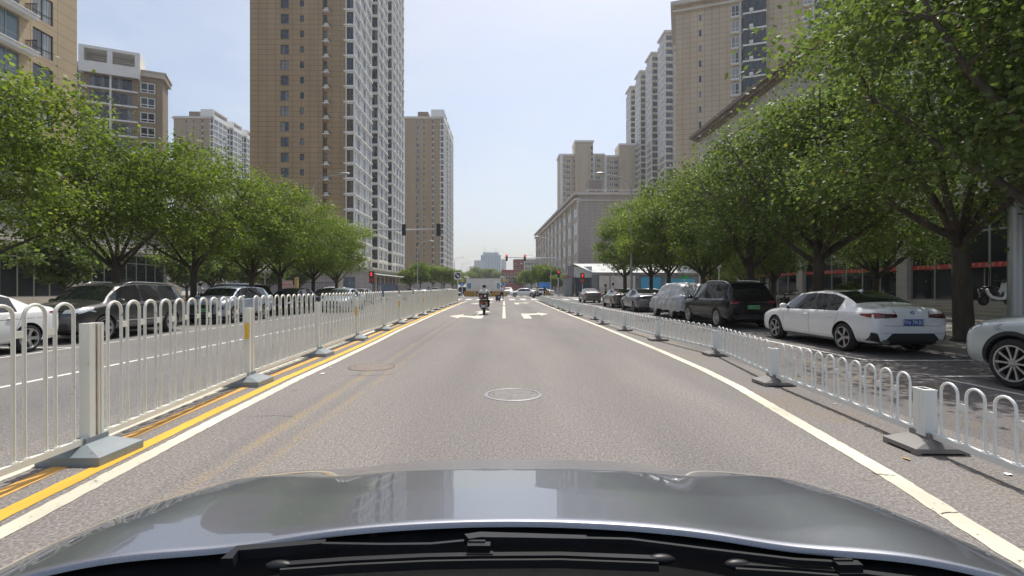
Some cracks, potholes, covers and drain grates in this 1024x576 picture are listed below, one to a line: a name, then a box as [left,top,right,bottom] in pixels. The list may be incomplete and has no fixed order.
manhole cover [484,388,542,401]
manhole cover [348,363,395,371]
